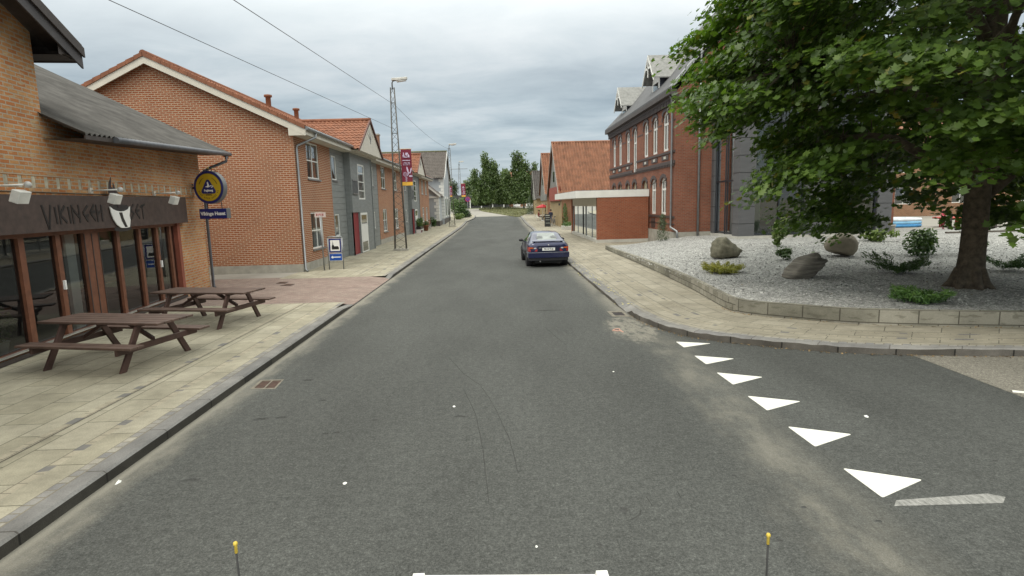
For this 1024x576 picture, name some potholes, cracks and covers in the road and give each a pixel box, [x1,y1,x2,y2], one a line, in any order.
crack [445,356,518,500]
drain grate [250,379,284,389]
